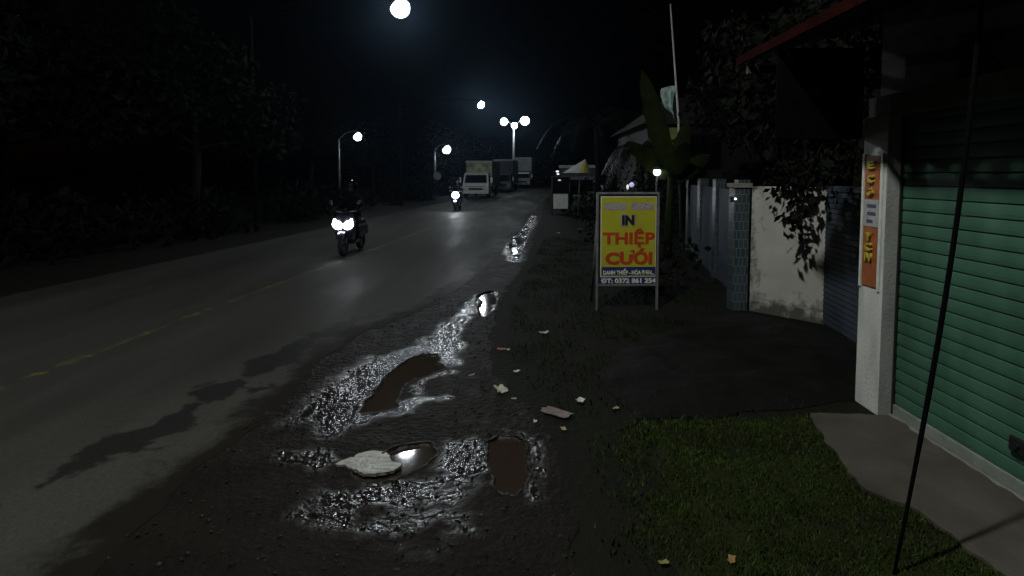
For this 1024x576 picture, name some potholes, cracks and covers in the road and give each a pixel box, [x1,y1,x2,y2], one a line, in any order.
pothole [475,290,499,317]
pothole [357,353,447,415]
pothole [484,434,534,496]
pothole [349,441,441,483]
pothole [506,226,530,259]
